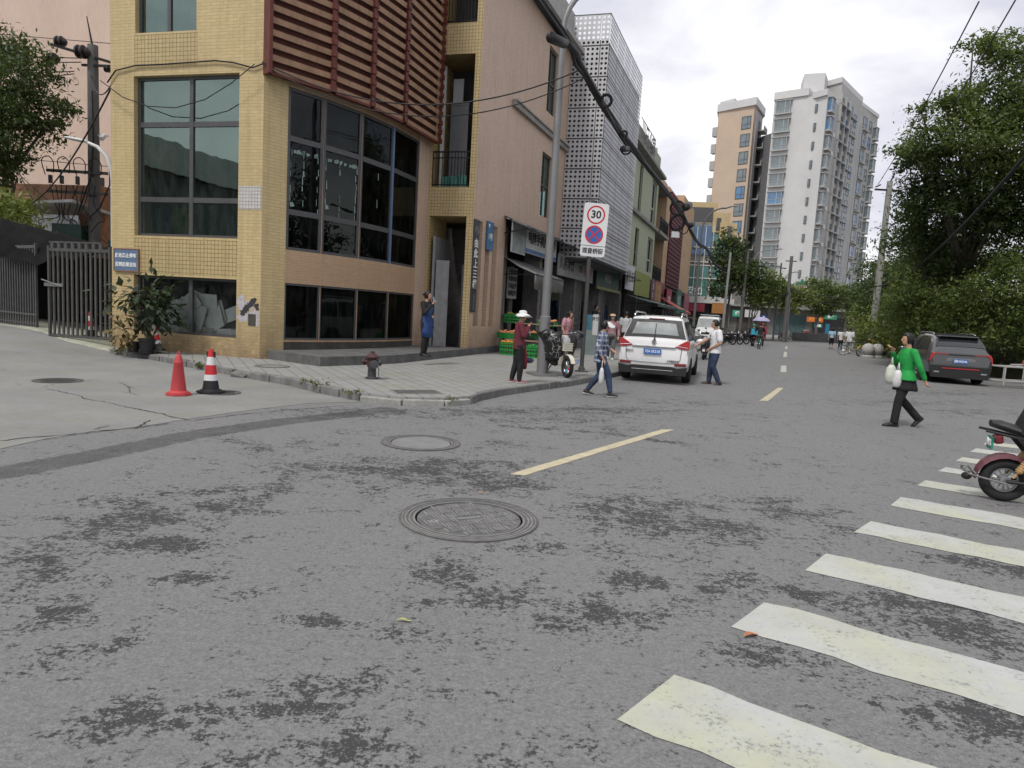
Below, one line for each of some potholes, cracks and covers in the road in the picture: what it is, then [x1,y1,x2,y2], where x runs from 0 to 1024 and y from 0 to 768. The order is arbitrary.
manhole cover [381,435,460,451]
crack [1,369,168,441]
manhole cover [399,498,538,543]
